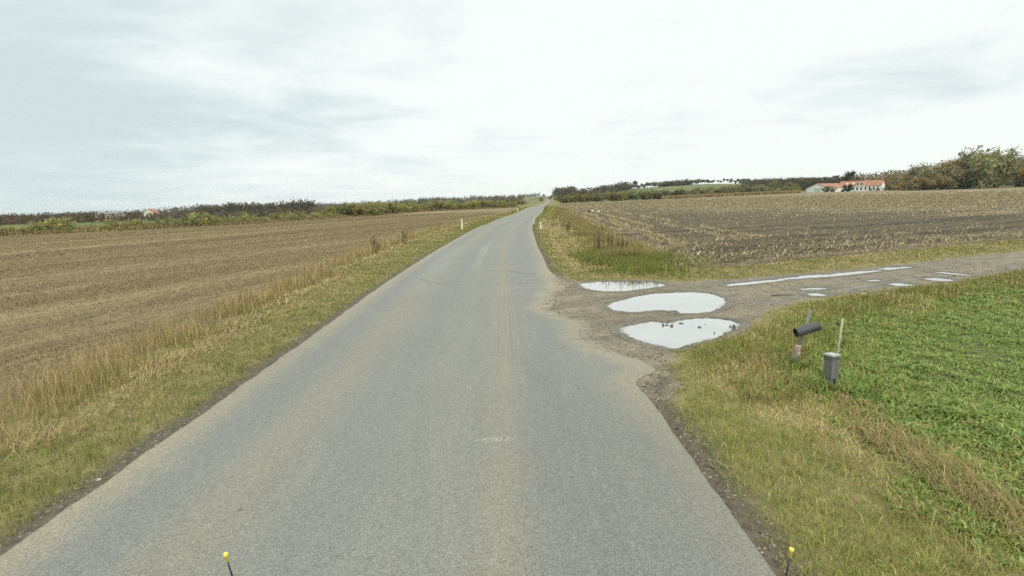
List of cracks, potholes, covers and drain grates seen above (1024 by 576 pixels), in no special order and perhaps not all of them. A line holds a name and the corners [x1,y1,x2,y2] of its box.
pothole [719,265,920,287]
pothole [597,290,735,315]
pothole [573,279,674,292]
pothole [610,316,752,351]
